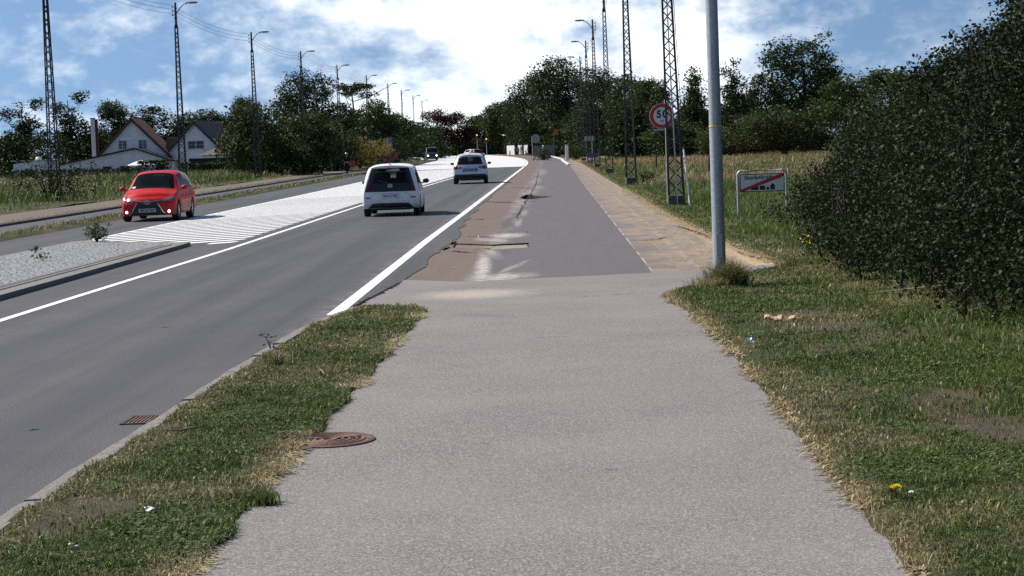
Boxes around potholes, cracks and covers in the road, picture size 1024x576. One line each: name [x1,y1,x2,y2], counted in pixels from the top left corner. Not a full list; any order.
drain grate [119,415,160,425]
crack [496,172,539,219]
manhole cover [284,432,375,448]
